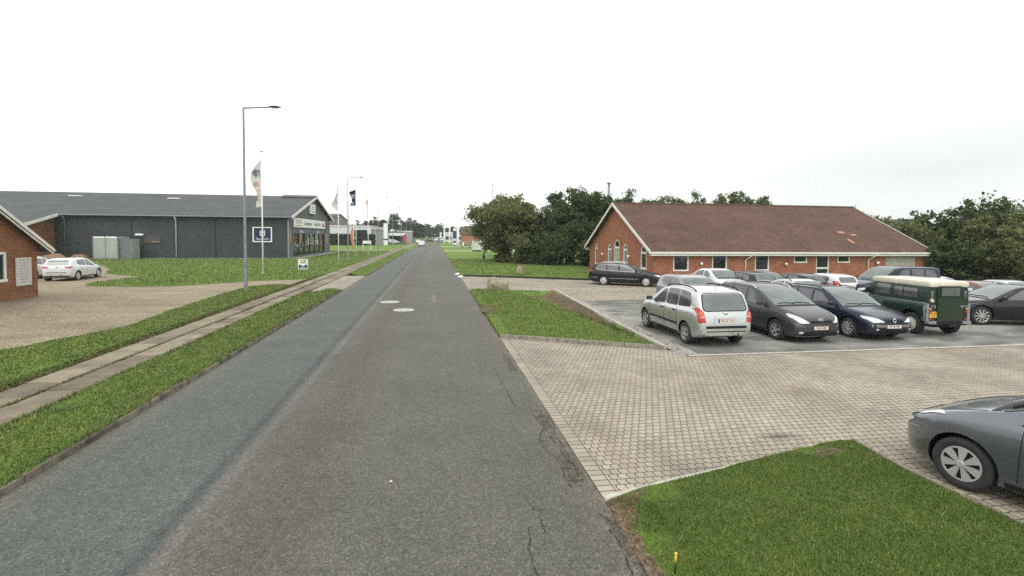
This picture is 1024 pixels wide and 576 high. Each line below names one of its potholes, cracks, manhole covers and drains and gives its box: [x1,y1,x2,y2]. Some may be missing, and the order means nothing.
crack [496,352,587,488]
